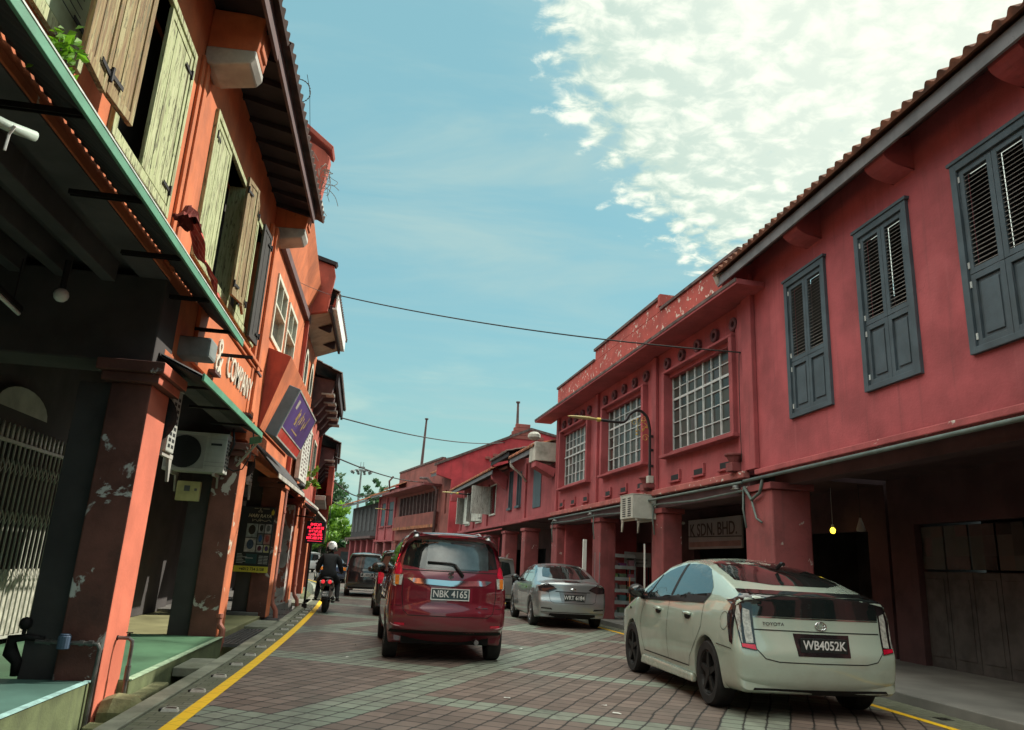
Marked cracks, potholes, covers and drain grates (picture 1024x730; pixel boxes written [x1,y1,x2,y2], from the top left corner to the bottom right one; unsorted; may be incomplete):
drain grate [222,628,265,647]
